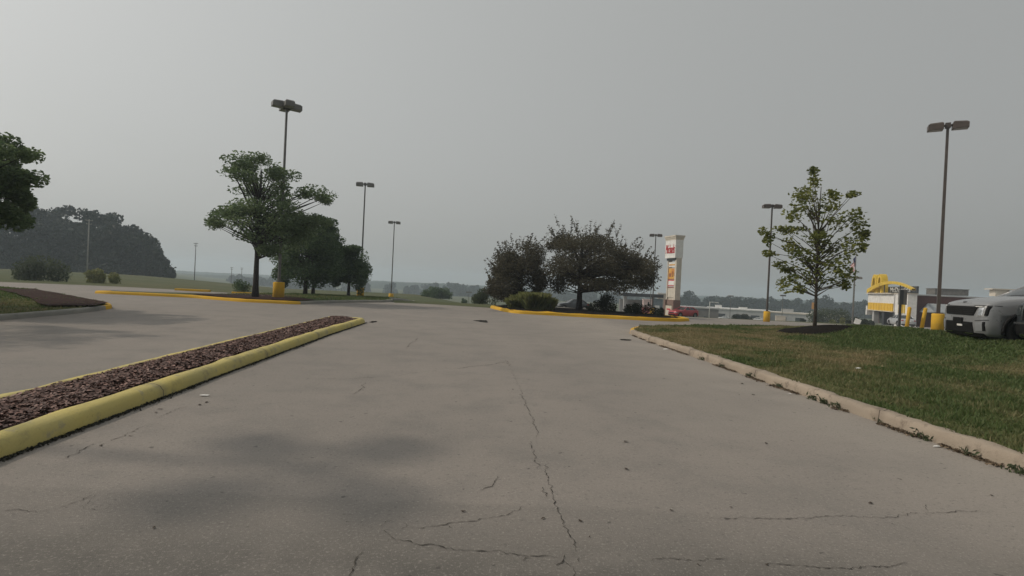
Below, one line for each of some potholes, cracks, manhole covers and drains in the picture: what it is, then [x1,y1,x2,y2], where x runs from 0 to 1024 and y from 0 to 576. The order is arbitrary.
crack [381,375,579,576]
crack [652,558,908,569]
crack [712,505,1001,519]
